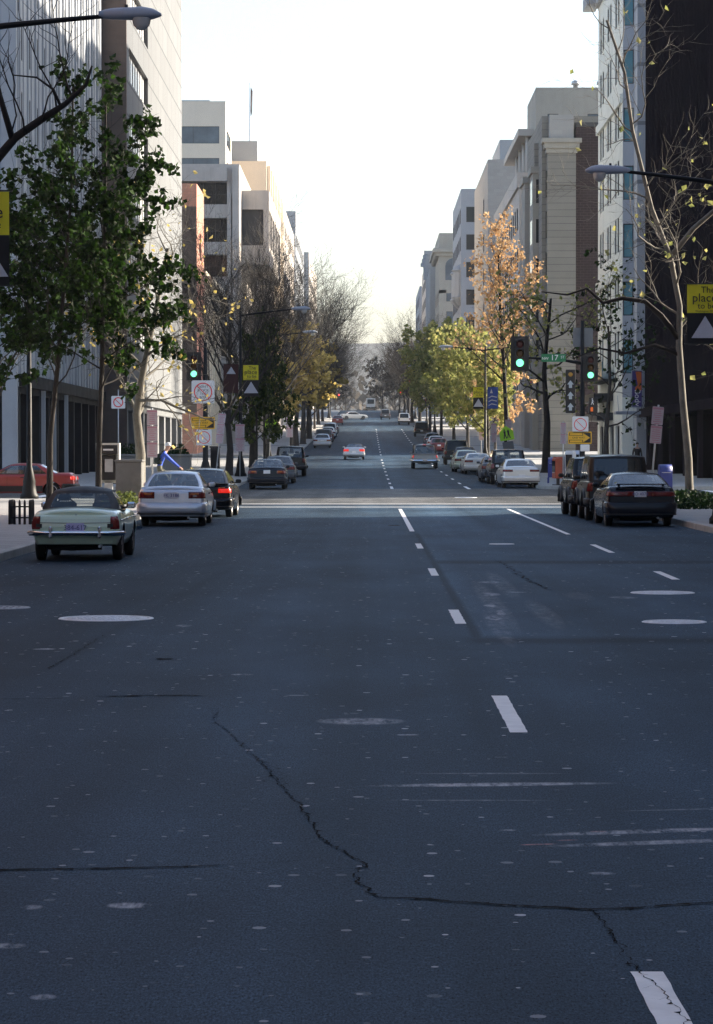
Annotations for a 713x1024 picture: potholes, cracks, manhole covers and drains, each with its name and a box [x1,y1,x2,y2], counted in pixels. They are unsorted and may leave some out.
crack [499,562,551,590]
crack [0,710,713,1024]
